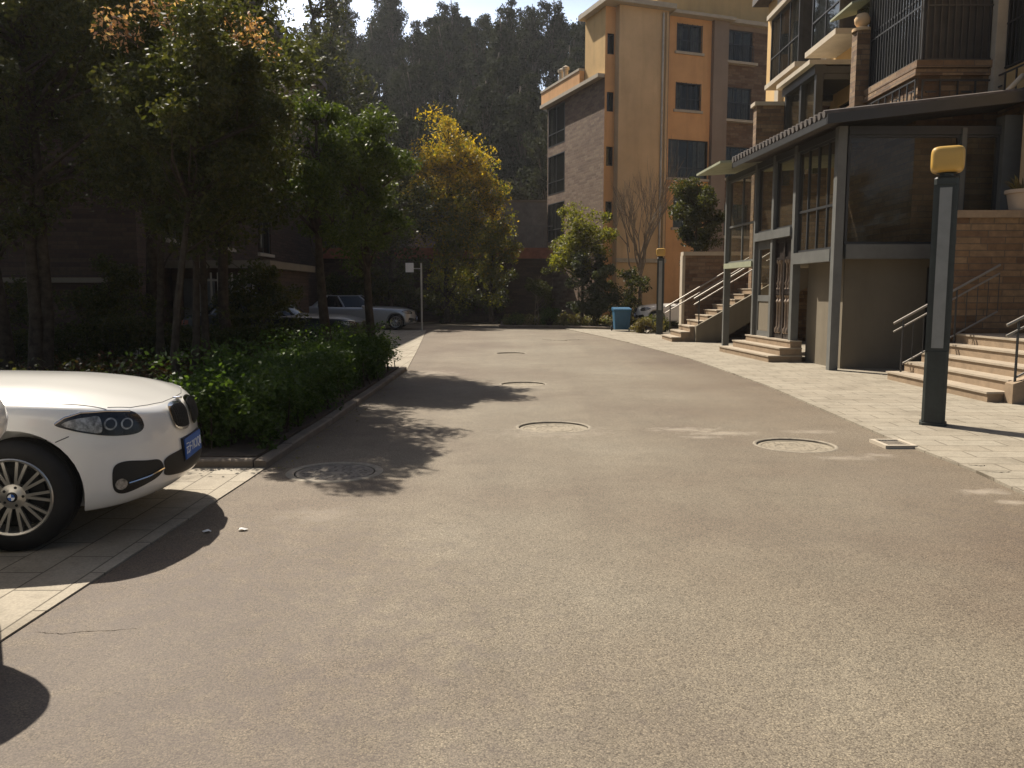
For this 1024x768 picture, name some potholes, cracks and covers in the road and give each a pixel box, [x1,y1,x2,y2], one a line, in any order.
manhole cover [753,438,839,453]
manhole cover [516,421,592,433]
manhole cover [285,462,383,483]
